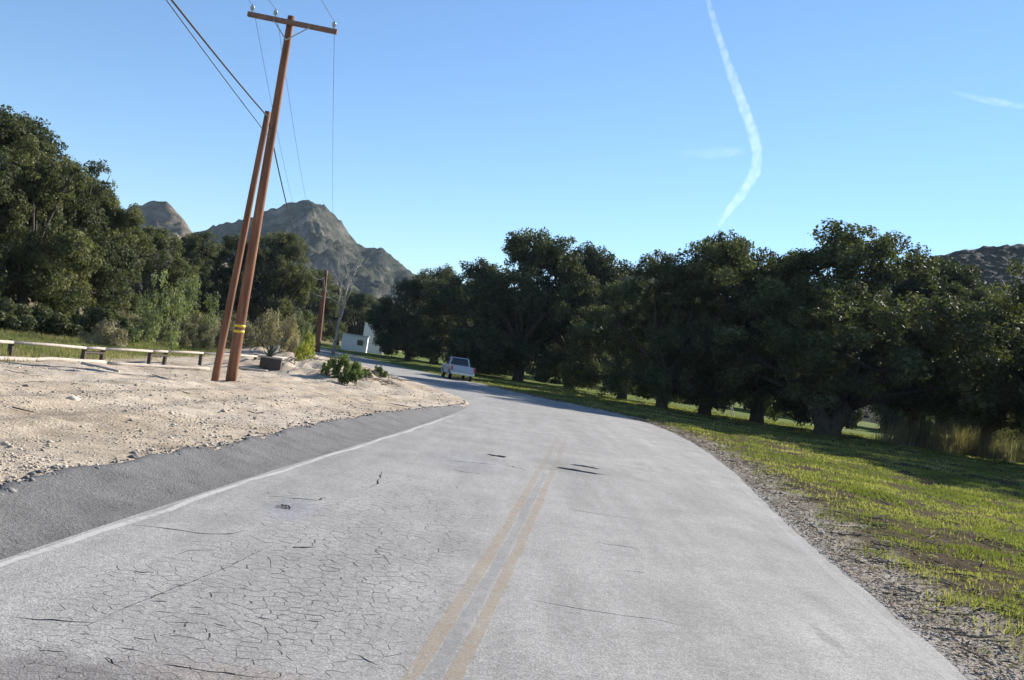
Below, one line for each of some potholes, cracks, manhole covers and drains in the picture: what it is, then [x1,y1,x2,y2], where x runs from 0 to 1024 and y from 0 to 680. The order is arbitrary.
crack [1,473,493,680]
crack [529,599,693,628]
